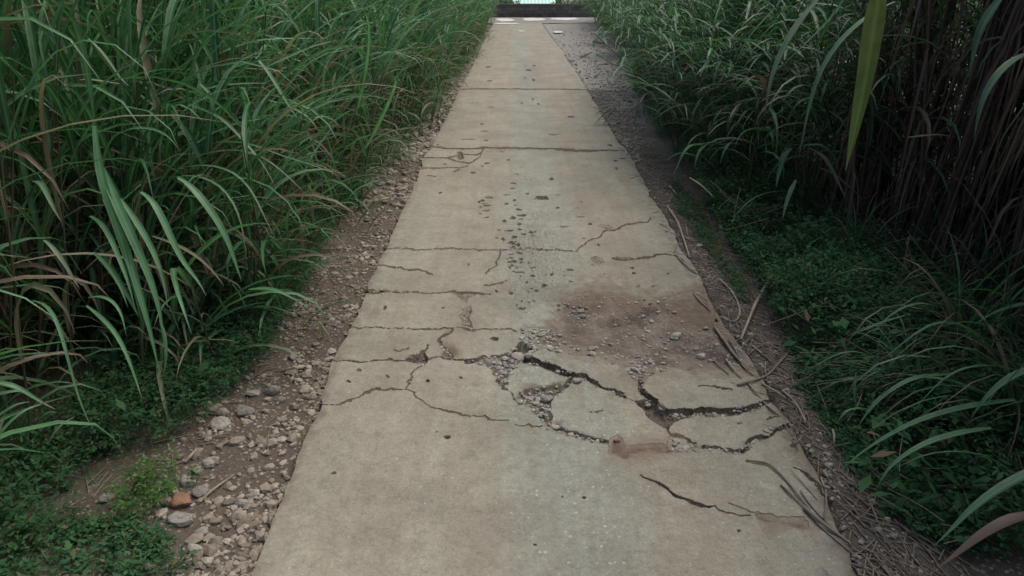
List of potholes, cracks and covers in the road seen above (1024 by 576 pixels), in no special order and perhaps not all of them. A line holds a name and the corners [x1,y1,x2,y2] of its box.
pothole [514,381,565,422]
crack [378,265,441,294]
crack [538,217,676,261]
crack [322,329,789,454]
